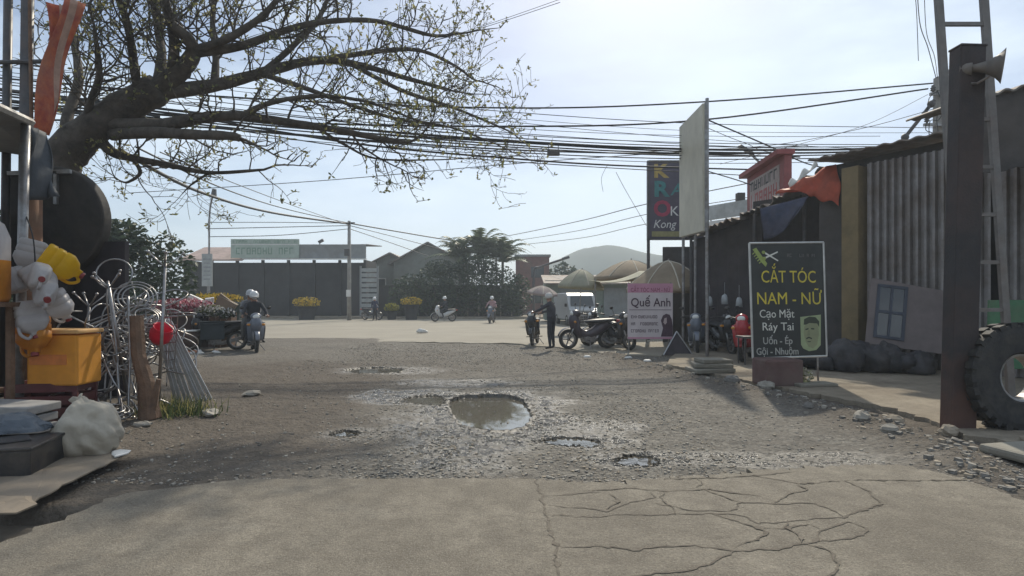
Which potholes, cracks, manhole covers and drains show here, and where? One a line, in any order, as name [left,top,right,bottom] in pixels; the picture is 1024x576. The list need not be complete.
pothole [399,394,448,406]
pothole [531,436,605,448]
pothole [328,429,361,437]
crack [516,471,976,576]
pothole [612,453,664,467]
pothole [341,366,406,374]
pothole [445,392,536,433]
